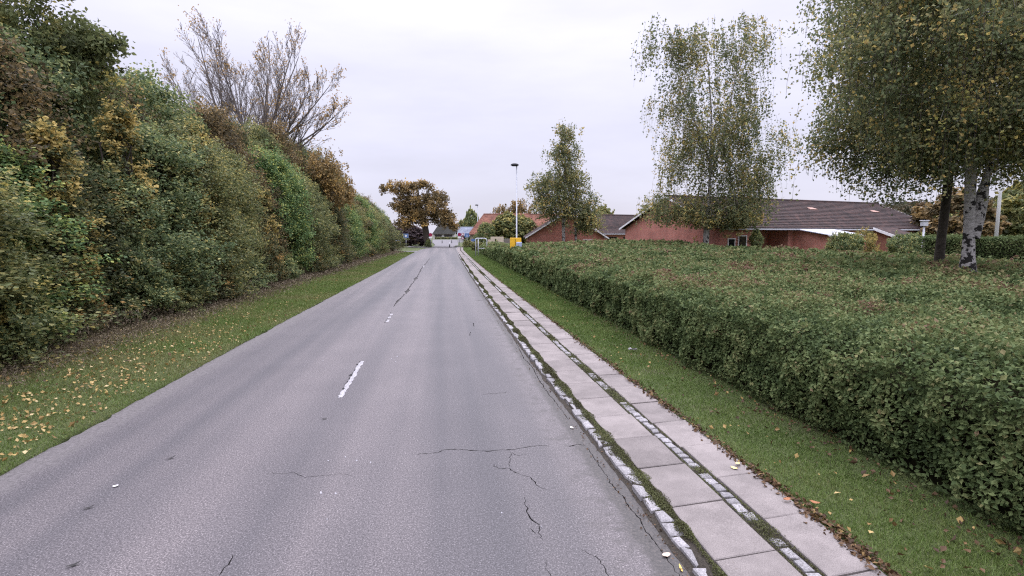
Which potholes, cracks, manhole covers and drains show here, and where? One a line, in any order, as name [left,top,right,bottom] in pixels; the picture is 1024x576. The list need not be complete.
crack [569,444,680,576]
crack [418,446,542,538]
